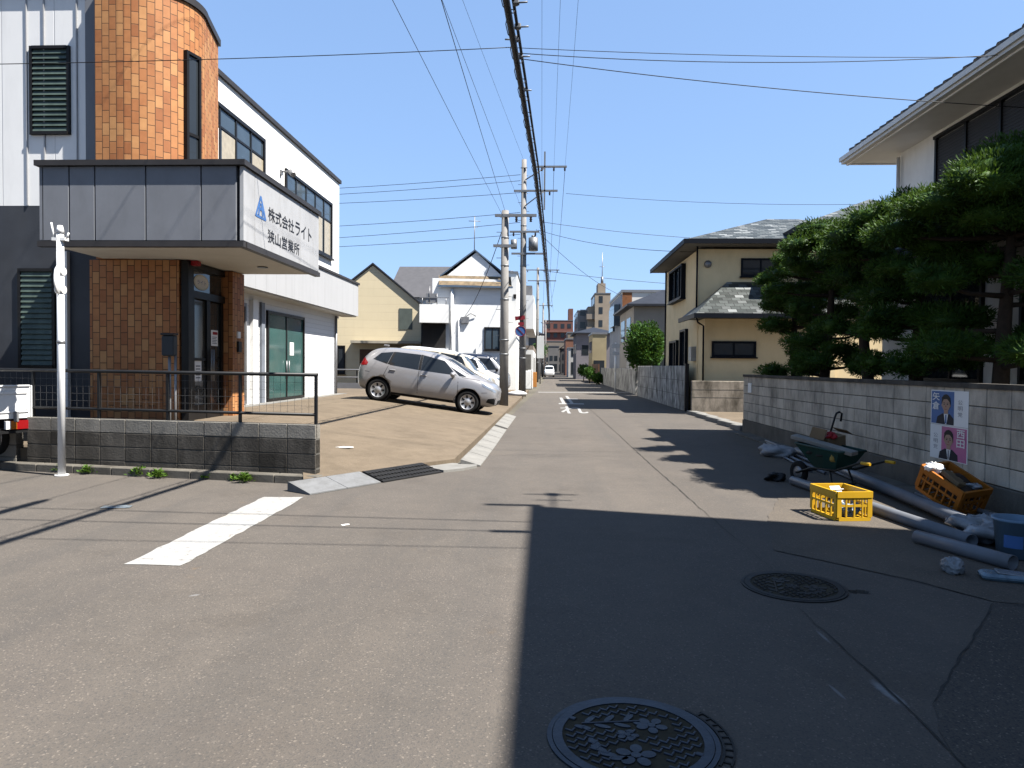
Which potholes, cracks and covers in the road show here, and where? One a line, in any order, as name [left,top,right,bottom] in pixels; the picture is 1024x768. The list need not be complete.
crack [776,550,1020,703]
manhole cover [547,697,736,768]
manhole cover [741,571,849,603]
